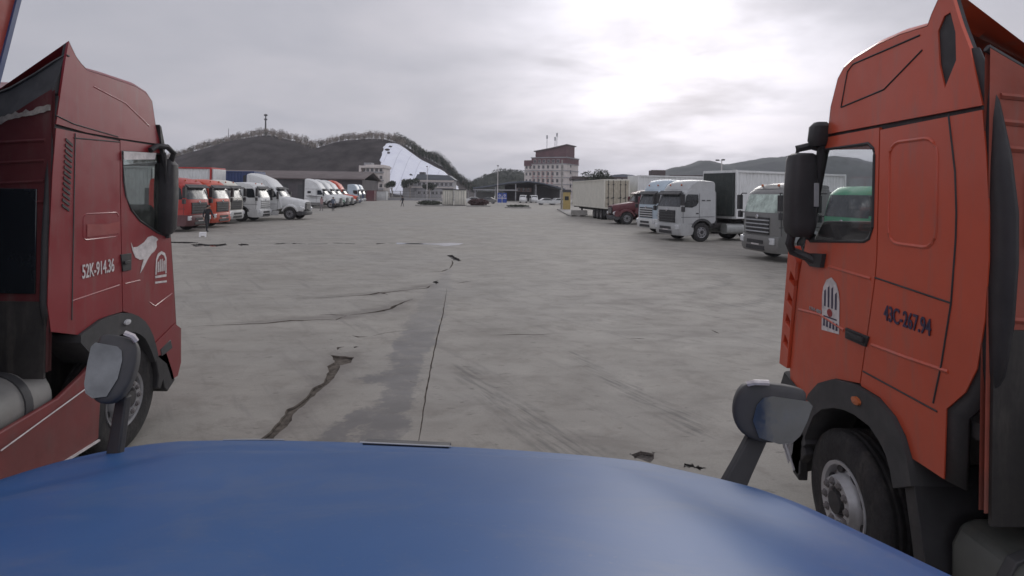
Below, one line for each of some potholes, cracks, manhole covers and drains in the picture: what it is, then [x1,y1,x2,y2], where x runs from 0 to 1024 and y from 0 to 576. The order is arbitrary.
pothole [630,451,655,463]
crack [188,261,468,441]
